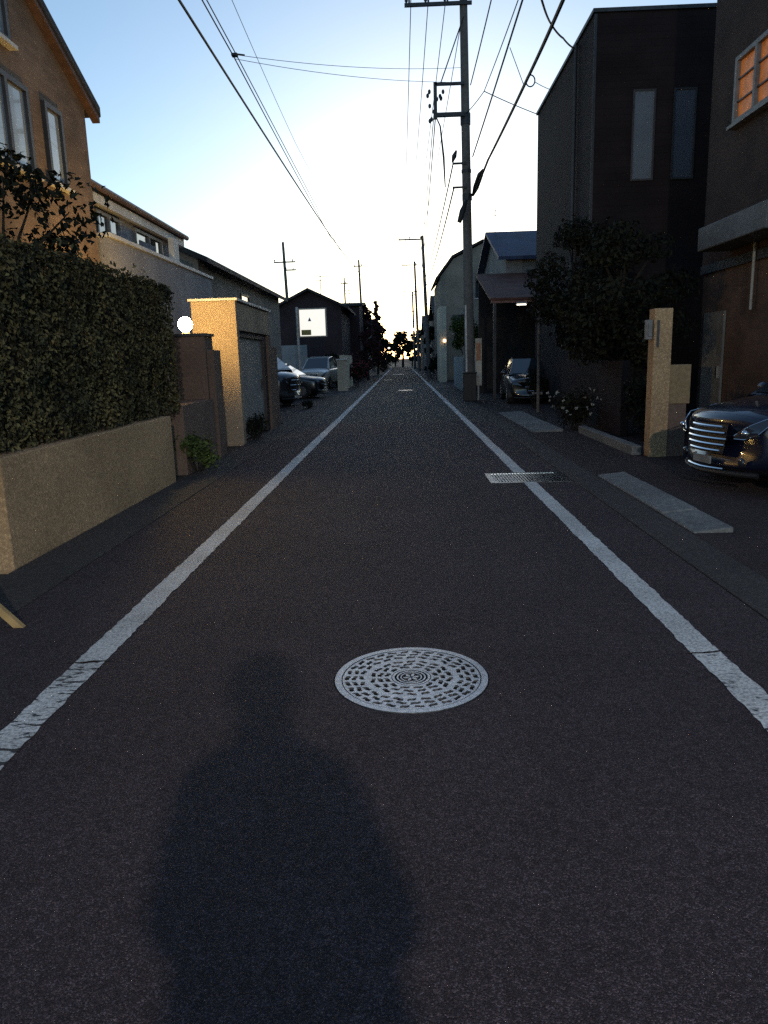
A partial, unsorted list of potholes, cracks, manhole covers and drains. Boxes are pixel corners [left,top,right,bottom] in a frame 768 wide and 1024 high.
drain grate [484,472,571,483]
manhole cover [335,647,488,714]
